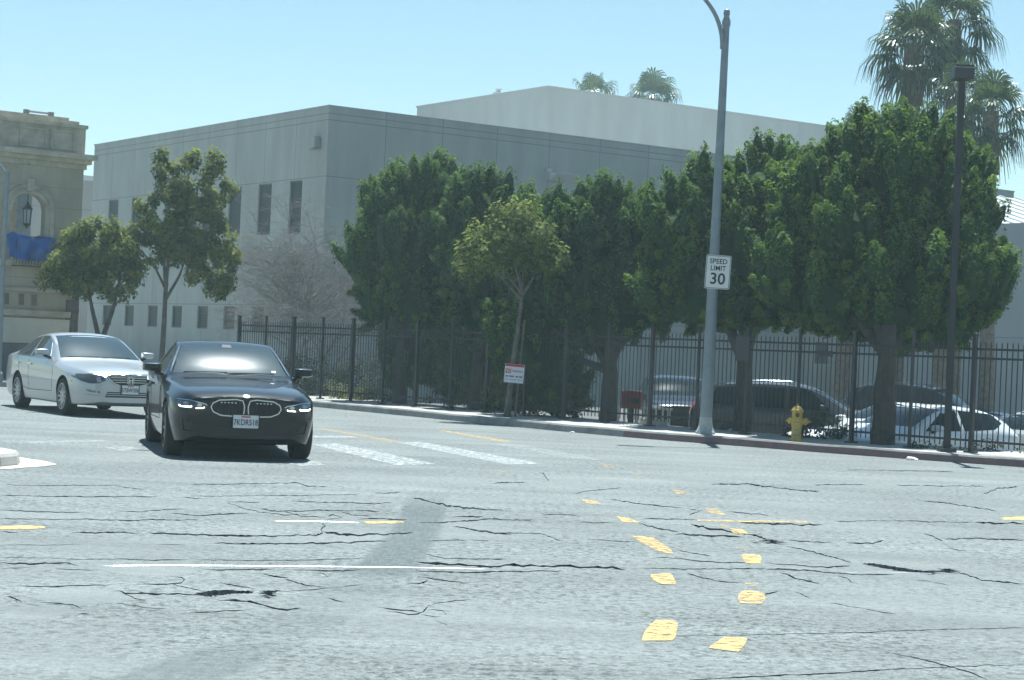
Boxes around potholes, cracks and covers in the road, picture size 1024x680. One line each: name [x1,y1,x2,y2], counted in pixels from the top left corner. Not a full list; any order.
crack [0,482,1023,625]
